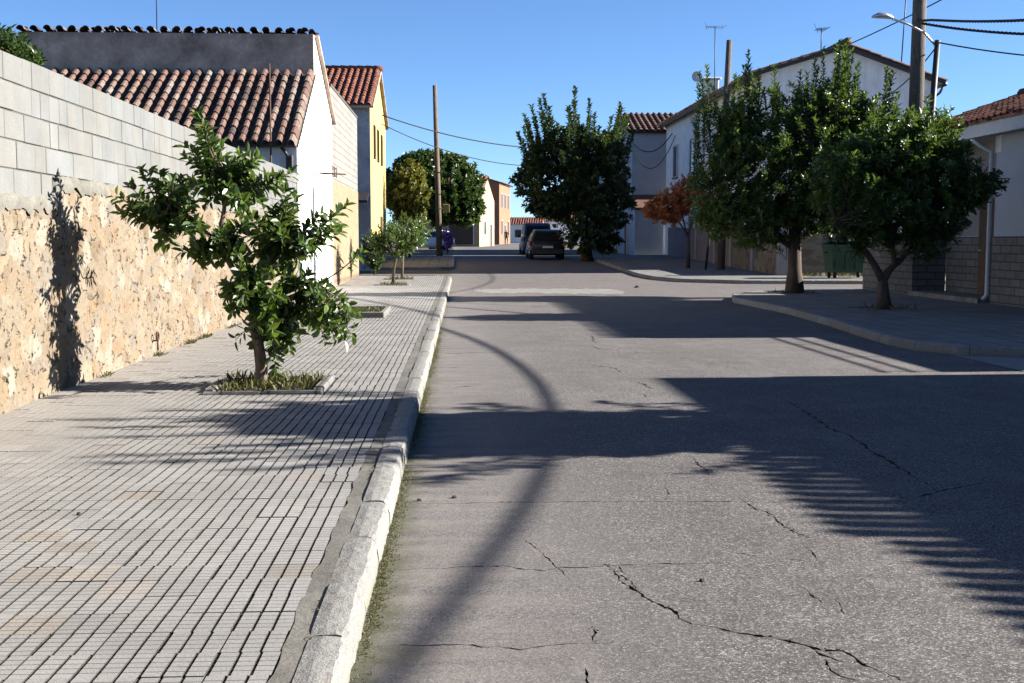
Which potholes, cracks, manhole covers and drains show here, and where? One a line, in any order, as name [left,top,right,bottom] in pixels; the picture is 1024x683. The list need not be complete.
crack [424,487,915,615]
crack [776,396,982,498]
crack [399,539,901,682]
